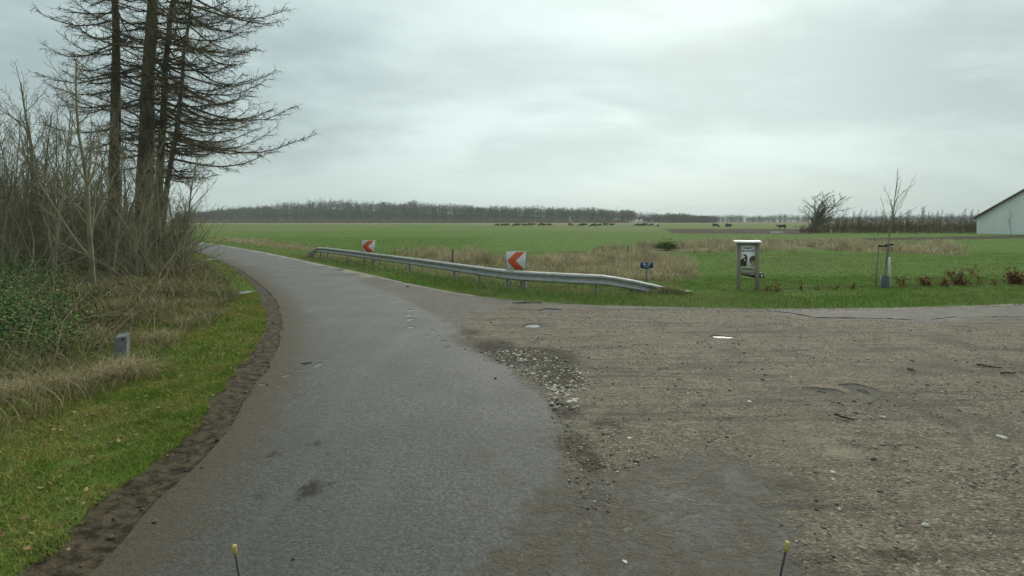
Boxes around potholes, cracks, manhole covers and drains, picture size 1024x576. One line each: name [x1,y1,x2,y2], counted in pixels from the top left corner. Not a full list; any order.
pothole [837,383,883,398]
crack [775,311,966,327]
